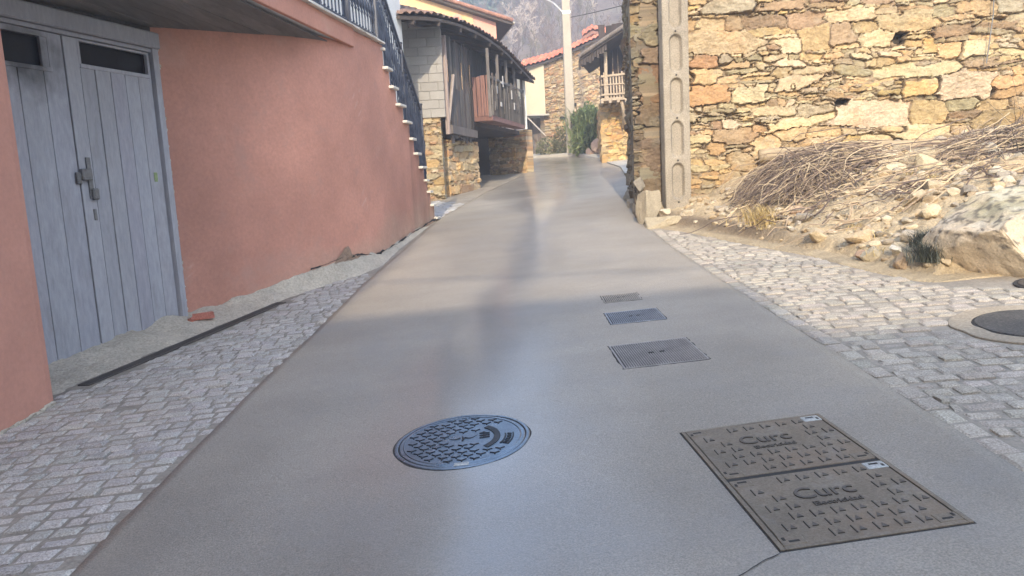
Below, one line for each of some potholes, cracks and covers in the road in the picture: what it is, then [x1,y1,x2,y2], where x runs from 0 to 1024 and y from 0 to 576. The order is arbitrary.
manhole cover [680,413,977,553]
crack [739,553,780,576]
manhole cover [948,305,1024,345]
manhole cover [393,414,532,471]
